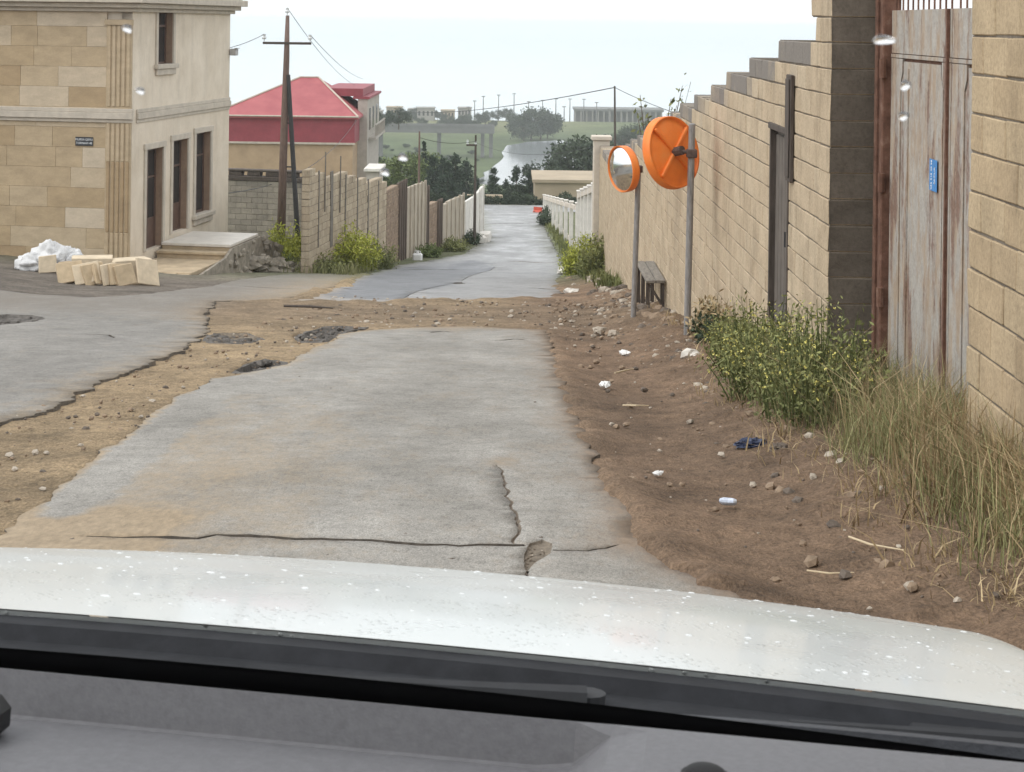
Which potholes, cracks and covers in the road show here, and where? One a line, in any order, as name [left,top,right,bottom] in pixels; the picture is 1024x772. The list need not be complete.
pothole [293,326,369,343]
pothole [202,332,265,344]
crack [88,466,524,547]
pothole [0,314,44,325]
pothole [524,539,552,572]
pothole [232,359,288,374]
